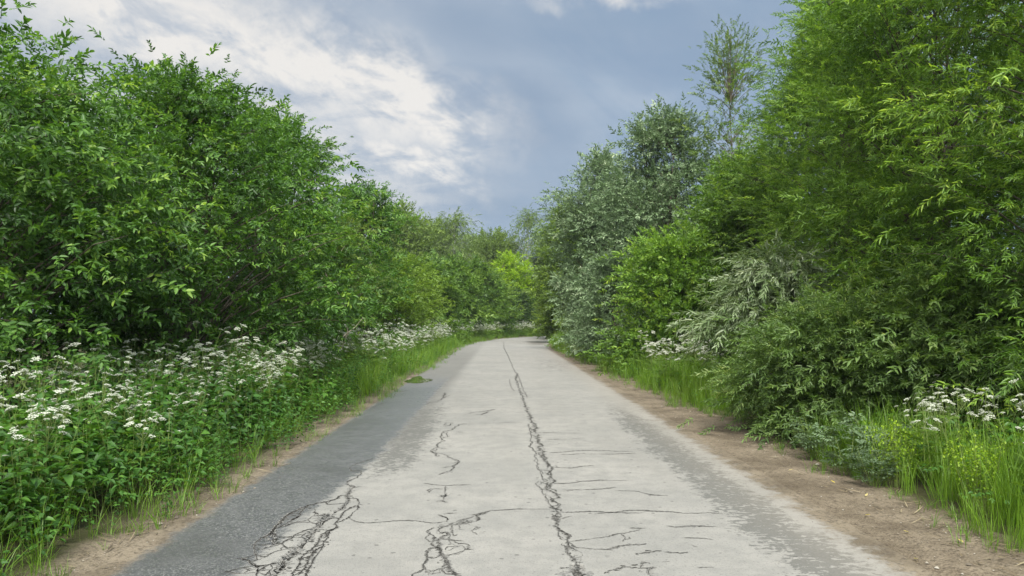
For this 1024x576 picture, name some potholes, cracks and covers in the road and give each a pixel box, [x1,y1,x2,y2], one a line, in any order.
crack [225,409,550,576]
crack [504,348,719,576]
